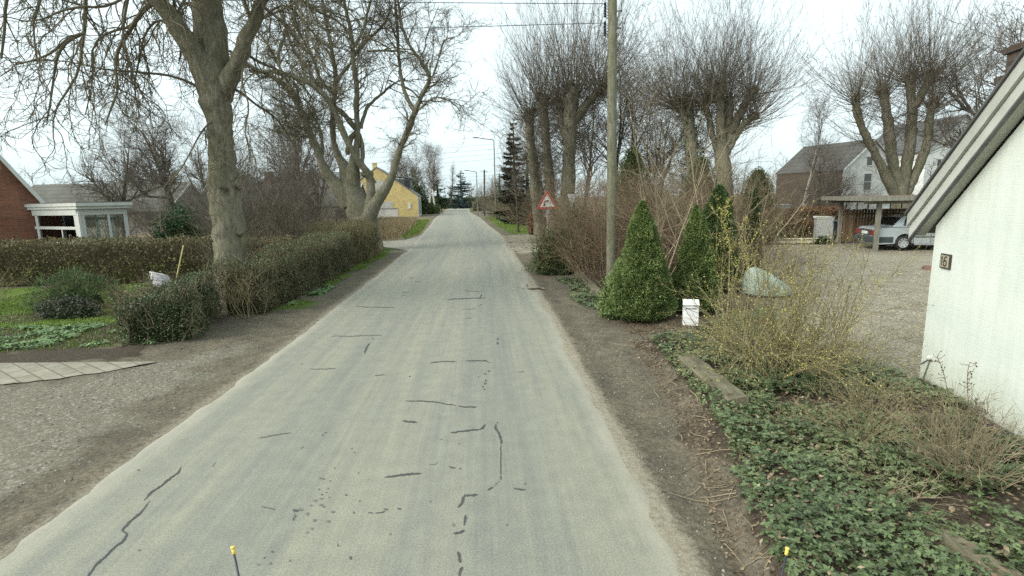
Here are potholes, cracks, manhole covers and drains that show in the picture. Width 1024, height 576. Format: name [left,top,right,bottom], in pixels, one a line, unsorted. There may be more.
crack [450,422,525,490]
crack [87,502,149,576]
